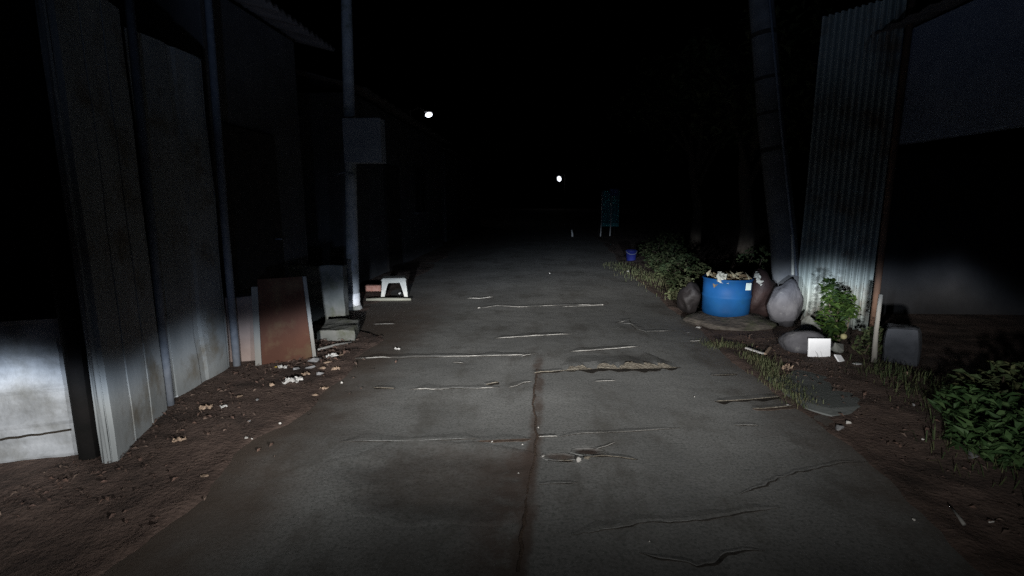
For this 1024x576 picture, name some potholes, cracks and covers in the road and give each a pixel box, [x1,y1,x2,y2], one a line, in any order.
crack [740,460,869,494]
crack [356,296,701,390]
pothole [570,447,606,456]
crack [640,546,765,568]
pothole [540,453,579,461]
crack [340,427,680,460]
